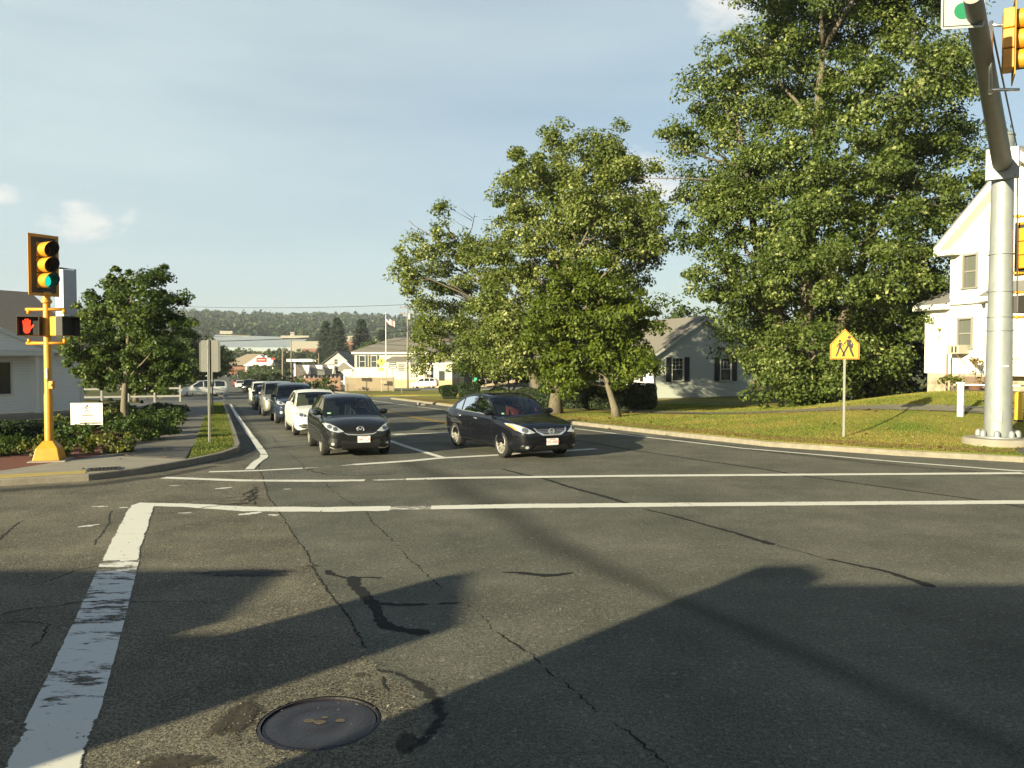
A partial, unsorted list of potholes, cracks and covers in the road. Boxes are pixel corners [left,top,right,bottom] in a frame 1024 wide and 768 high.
crack [323,482,444,589]
manhole cover [256,697,381,752]
crack [468,605,668,768]
